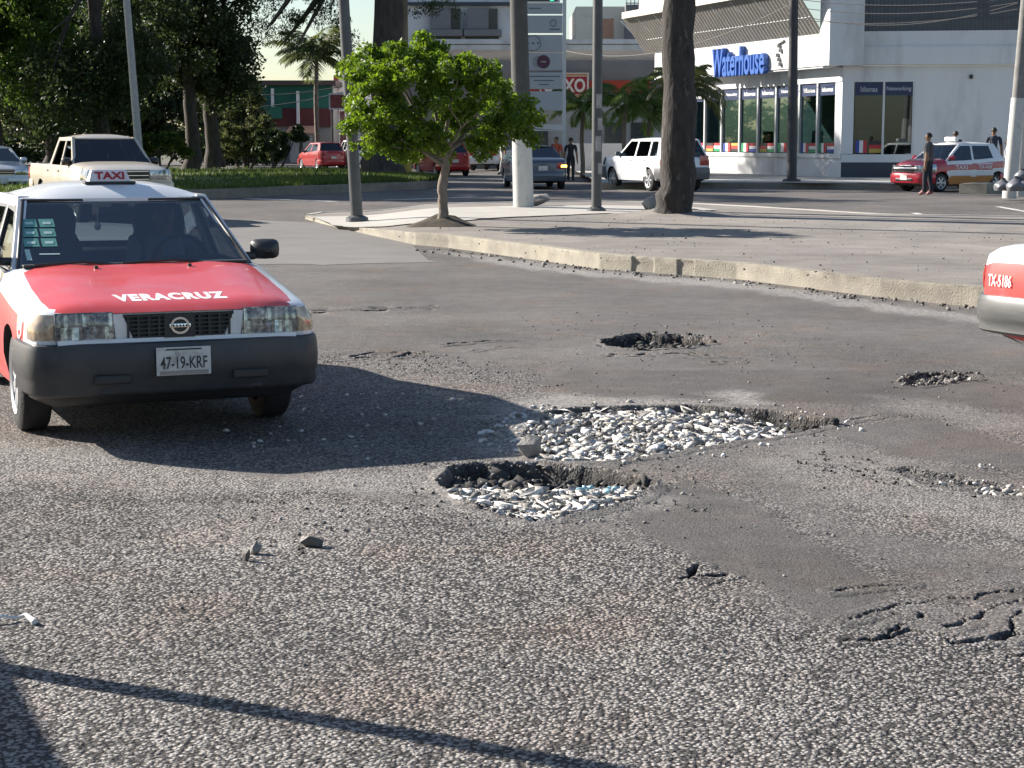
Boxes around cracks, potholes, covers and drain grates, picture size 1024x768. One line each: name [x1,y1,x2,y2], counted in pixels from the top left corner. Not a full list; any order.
pothole [869,464,1024,500]
crack [661,560,746,586]
pothole [504,403,856,466]
pothole [890,371,991,389]
pothole [589,332,728,359]
crack [815,578,1024,667]
pothole [419,459,672,527]
